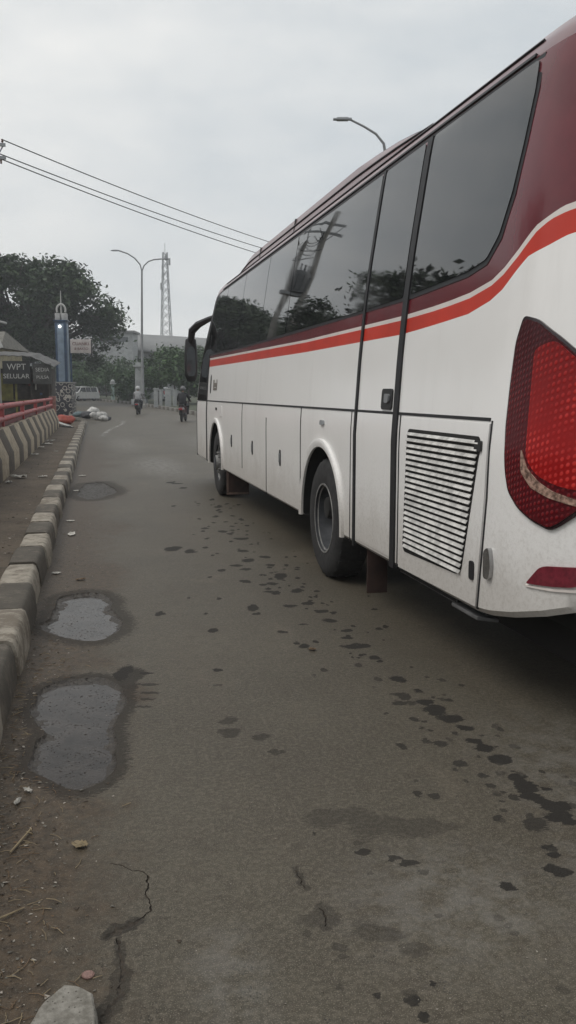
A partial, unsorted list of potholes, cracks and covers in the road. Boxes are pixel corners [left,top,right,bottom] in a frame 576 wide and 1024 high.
pothole [77,482,117,499]
crack [295,870,327,926]
pothole [27,677,127,790]
crack [98,863,152,1024]
pothole [39,592,123,641]
